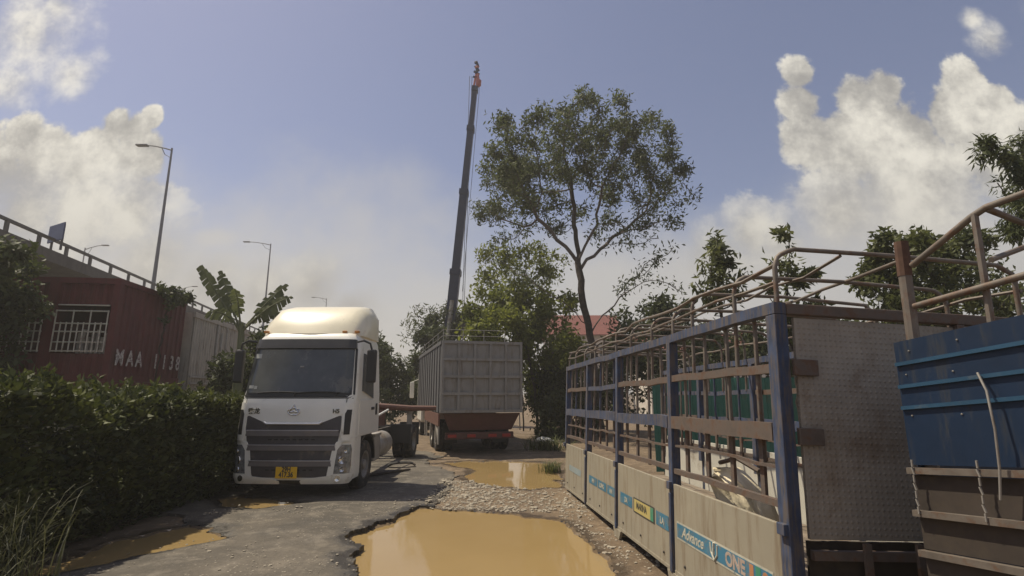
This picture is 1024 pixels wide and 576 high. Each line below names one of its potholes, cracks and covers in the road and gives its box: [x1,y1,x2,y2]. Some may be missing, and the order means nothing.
pothole [444,460,565,490]
pothole [15,525,226,576]
pothole [348,507,619,576]
pothole [218,496,294,509]
